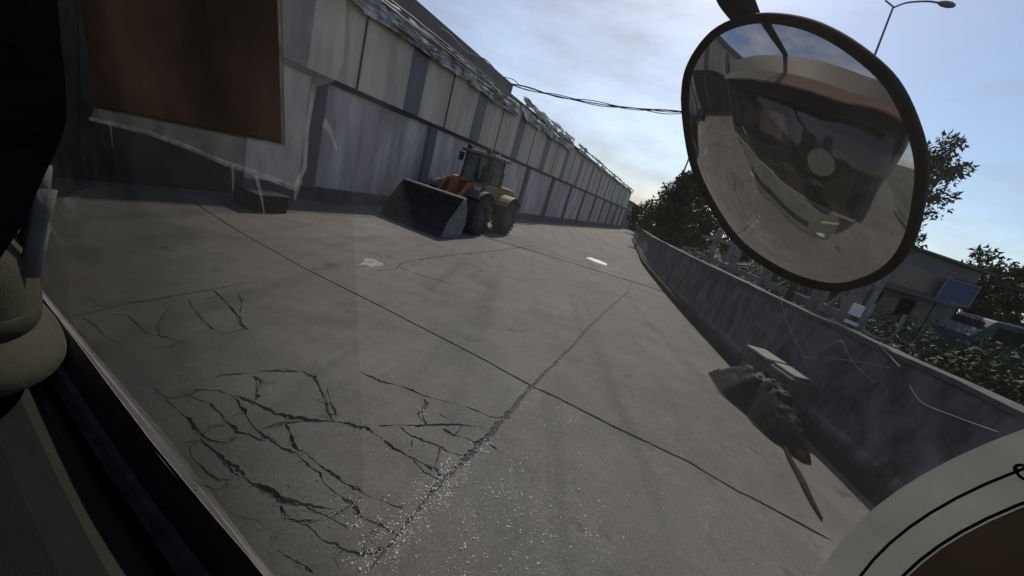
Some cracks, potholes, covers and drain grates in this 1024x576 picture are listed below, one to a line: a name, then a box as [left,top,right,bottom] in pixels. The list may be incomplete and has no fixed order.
crack [154,369,500,574]
crack [111,291,250,348]
